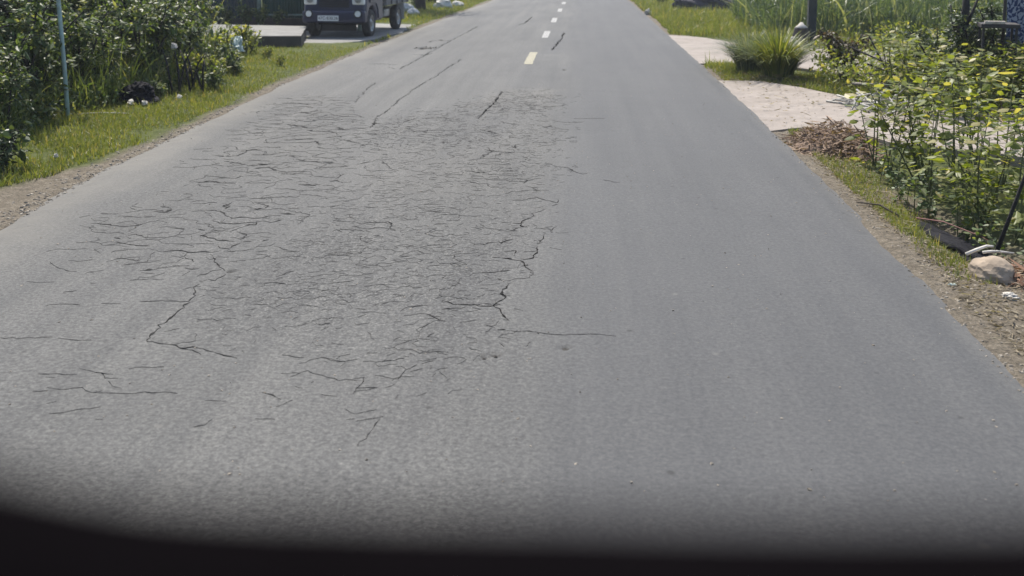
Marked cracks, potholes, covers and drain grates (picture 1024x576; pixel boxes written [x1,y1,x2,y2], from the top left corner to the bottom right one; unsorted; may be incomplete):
crack [45,367,177,420]
crack [69,89,613,446]
